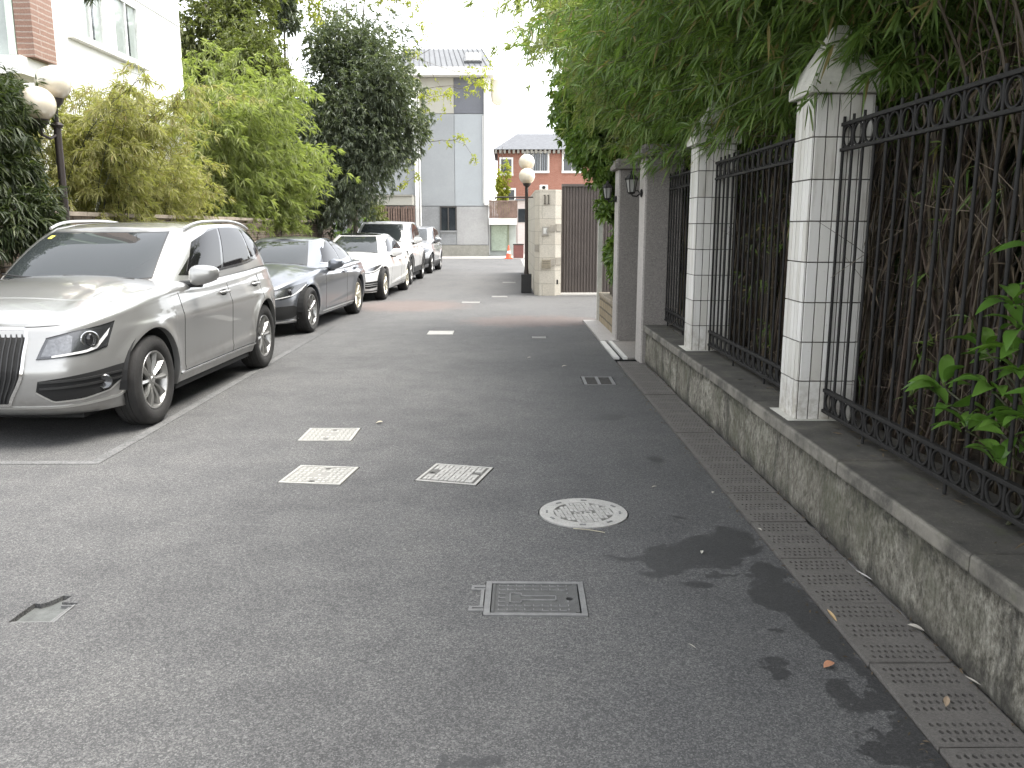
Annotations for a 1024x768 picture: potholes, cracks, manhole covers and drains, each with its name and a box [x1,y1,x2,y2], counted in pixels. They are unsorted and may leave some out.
drain grate [581,376,616,385]
manhole cover [16,600,76,622]
manhole cover [468,581,588,617]
manhole cover [298,428,361,441]
manhole cover [415,463,493,486]
manhole cover [278,465,359,486]
manhole cover [540,498,627,529]
